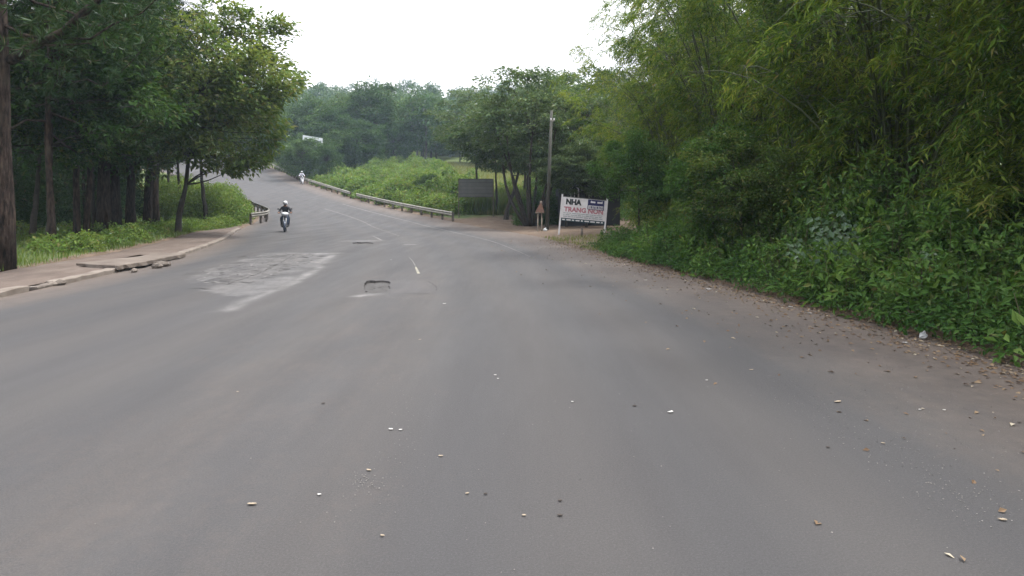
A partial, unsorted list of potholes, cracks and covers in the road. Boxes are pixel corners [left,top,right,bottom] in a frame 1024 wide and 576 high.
pothole [364,280,391,294]
crack [183,253,321,289]
